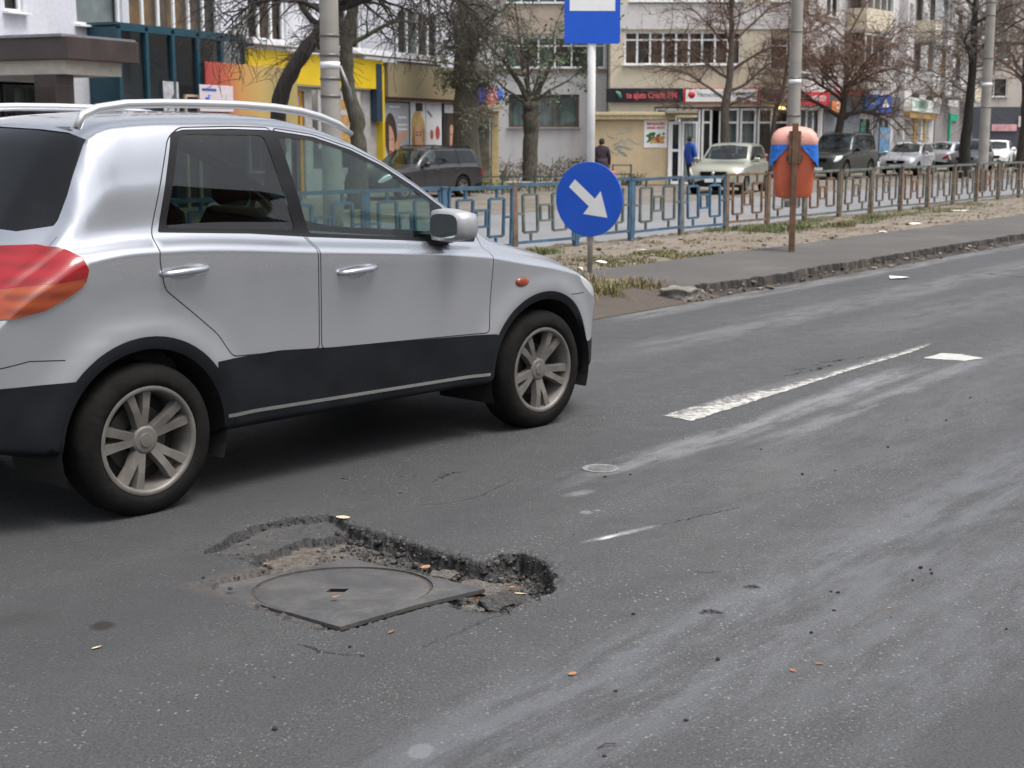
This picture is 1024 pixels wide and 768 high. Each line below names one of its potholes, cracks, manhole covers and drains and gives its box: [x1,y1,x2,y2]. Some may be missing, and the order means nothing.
manhole cover [213,558,485,631]
crack [296,643,365,658]
pothole [186,515,558,632]
crack [662,507,740,525]
manhole cover [582,464,619,473]
